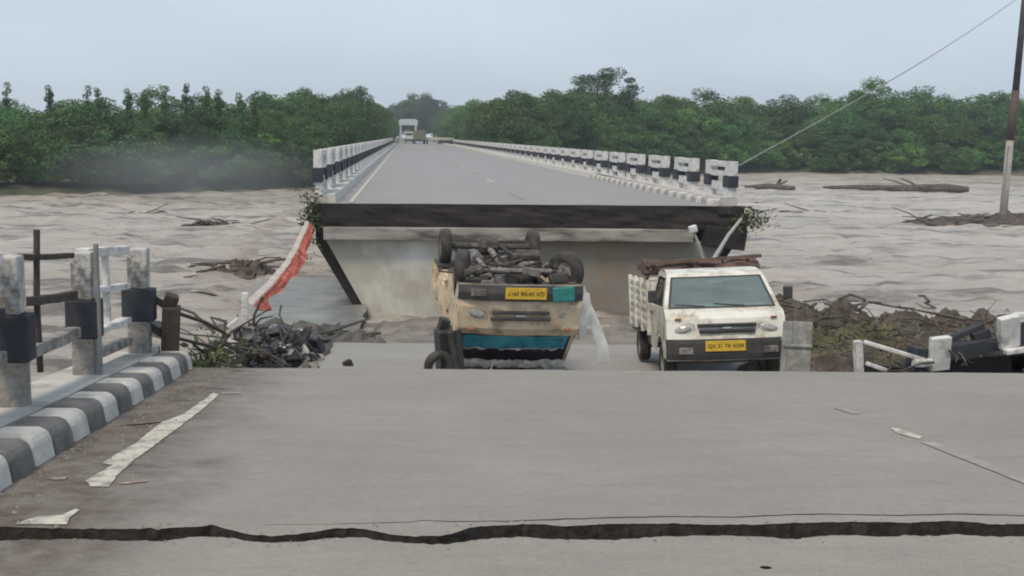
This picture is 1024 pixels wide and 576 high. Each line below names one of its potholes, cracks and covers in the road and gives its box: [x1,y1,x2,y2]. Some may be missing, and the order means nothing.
crack [0,514,1024,568]
